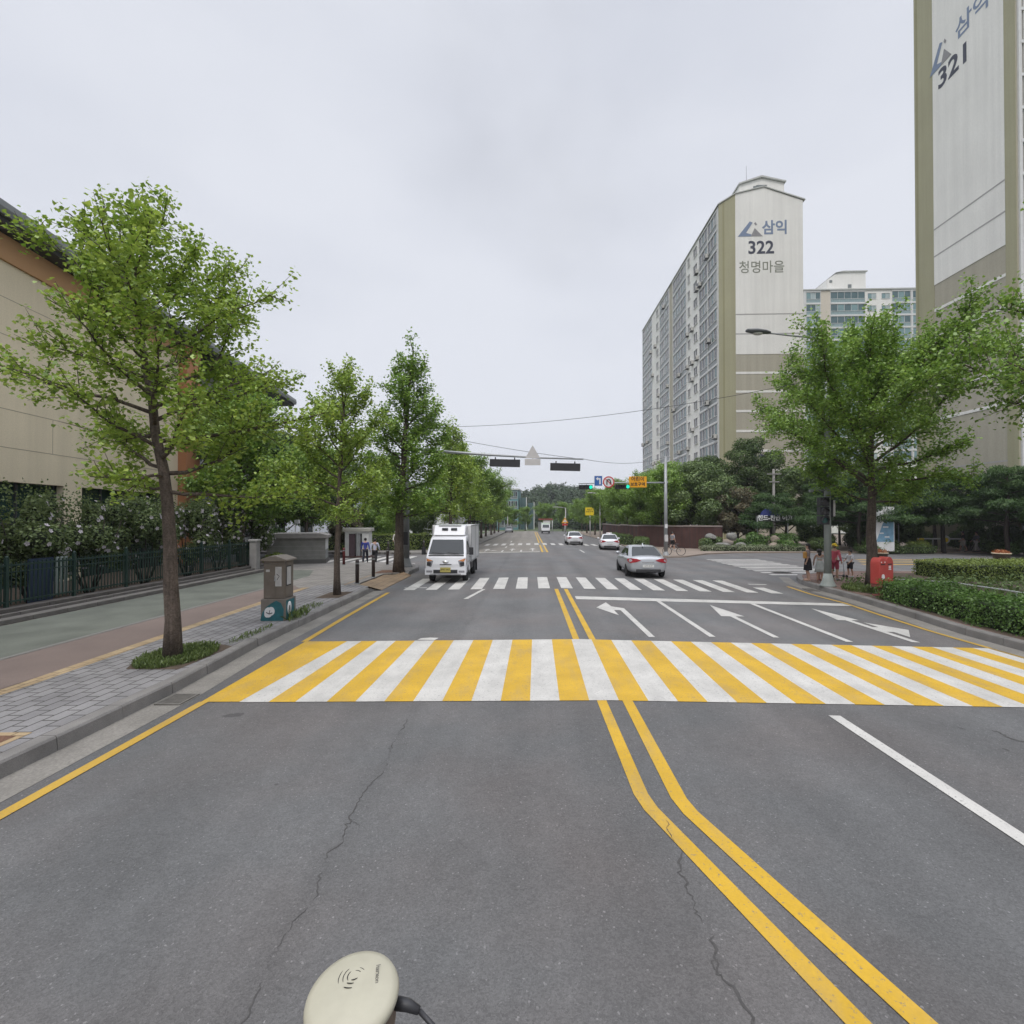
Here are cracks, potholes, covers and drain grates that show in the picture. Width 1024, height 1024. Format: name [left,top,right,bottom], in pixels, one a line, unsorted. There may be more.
crack [666,820,755,1024]
drain grate [154,693,200,705]
crack [240,721,407,1024]
